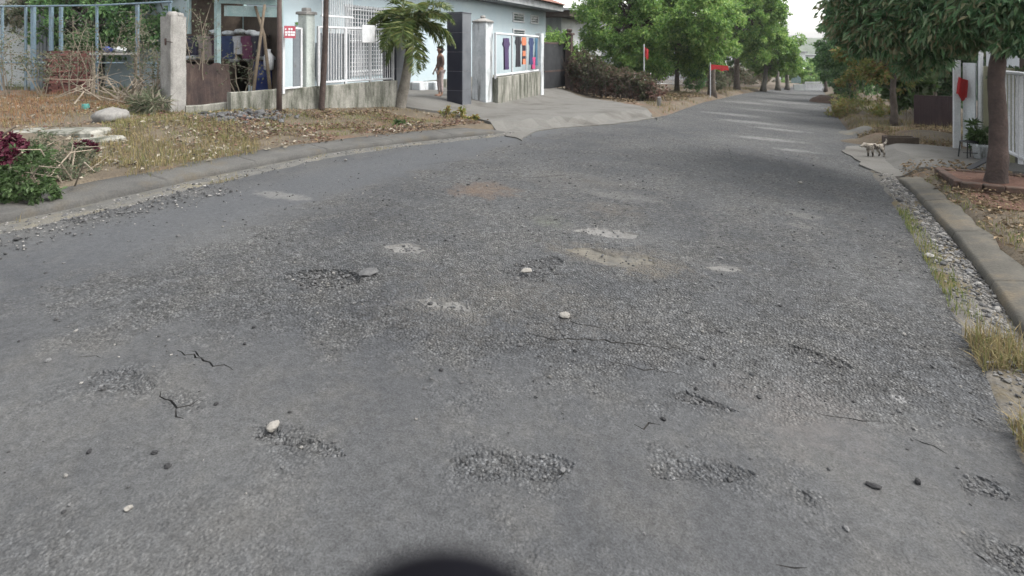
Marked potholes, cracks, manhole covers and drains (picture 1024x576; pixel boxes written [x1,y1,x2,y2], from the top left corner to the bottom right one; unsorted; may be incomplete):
pothole [449,451,576,484]
pothole [787,344,853,372]
pothole [417,298,473,312]
crack [177,350,233,370]
pothole [644,459,761,483]
pothole [496,255,563,282]
crack [159,392,201,419]
pothole [672,390,741,413]
pothole [86,368,156,395]
pothole [986,544,1024,575]
pothole [250,423,347,458]
pothole [283,269,361,292]
